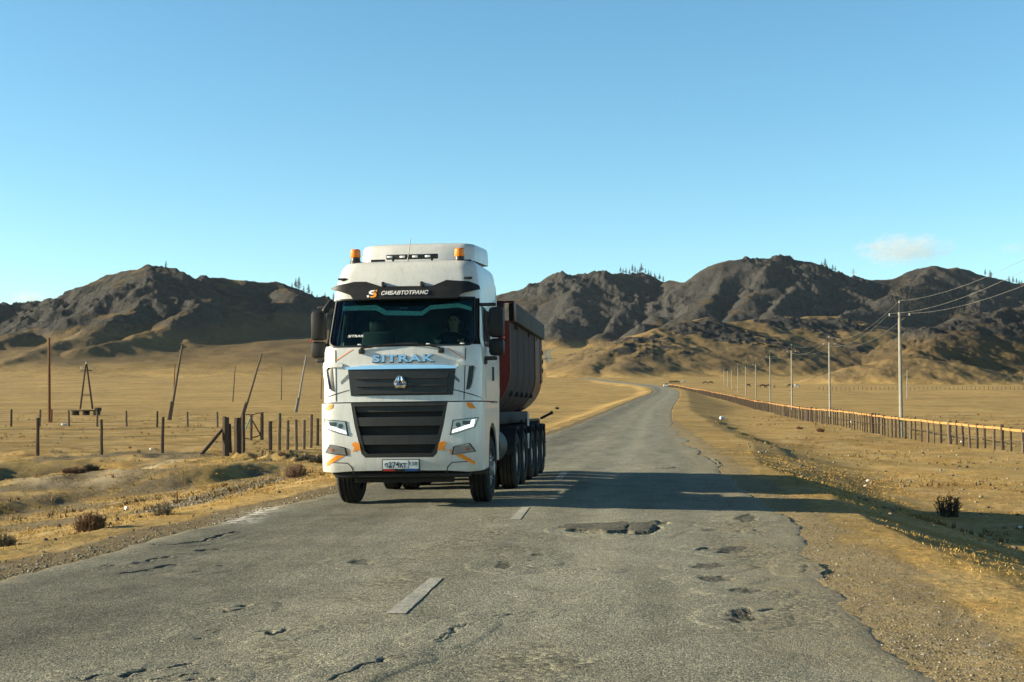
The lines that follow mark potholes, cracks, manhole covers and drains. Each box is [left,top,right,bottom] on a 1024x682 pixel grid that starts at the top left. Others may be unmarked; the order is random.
pothole [657,560,760,573]
pothole [693,543,779,558]
crack [74,530,262,578]
pothole [543,519,695,539]
crack [36,601,569,682]
